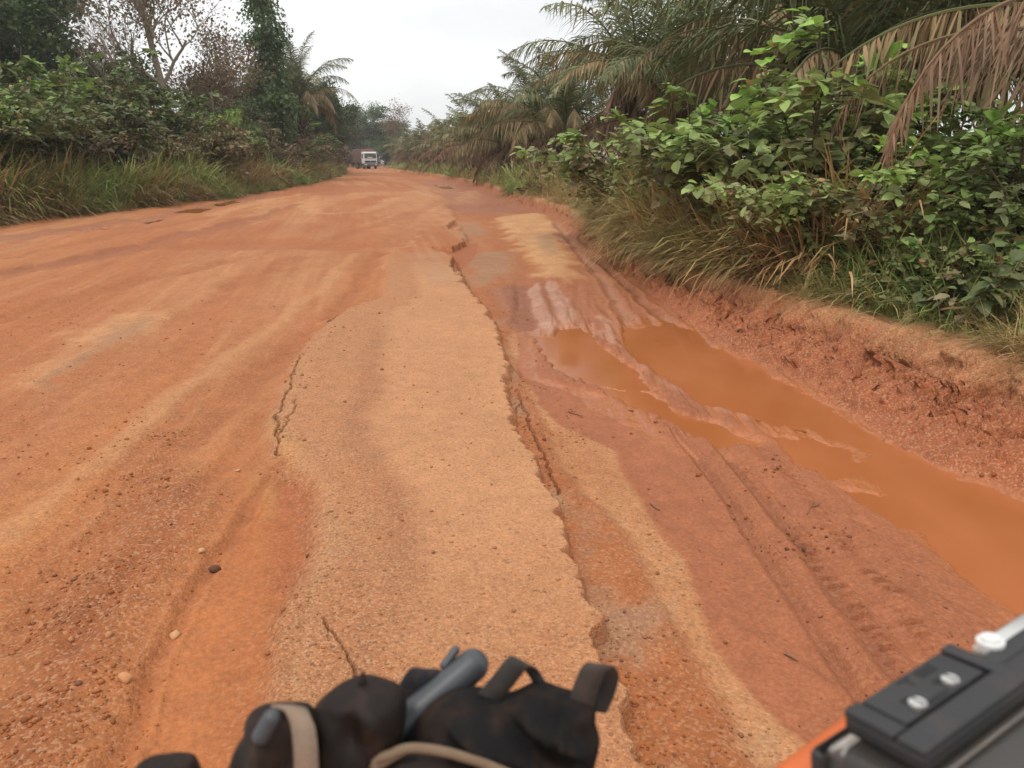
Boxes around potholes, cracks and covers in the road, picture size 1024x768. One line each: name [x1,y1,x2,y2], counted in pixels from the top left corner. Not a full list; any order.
crack [321,616,360,677]
pothole [585,383,773,450]
pothole [530,326,662,394]
crack [271,354,302,444]
pothole [614,320,1024,617]
